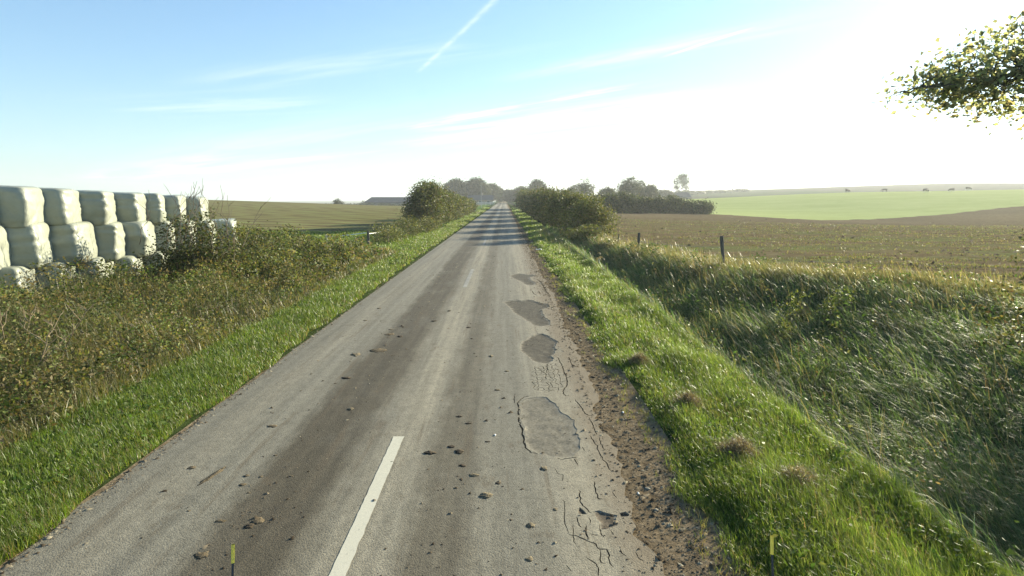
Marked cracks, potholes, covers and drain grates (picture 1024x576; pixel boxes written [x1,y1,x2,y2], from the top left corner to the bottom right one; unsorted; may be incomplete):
pothole [518,397,581,458]
pothole [594,511,618,529]
crack [513,357,641,576]
